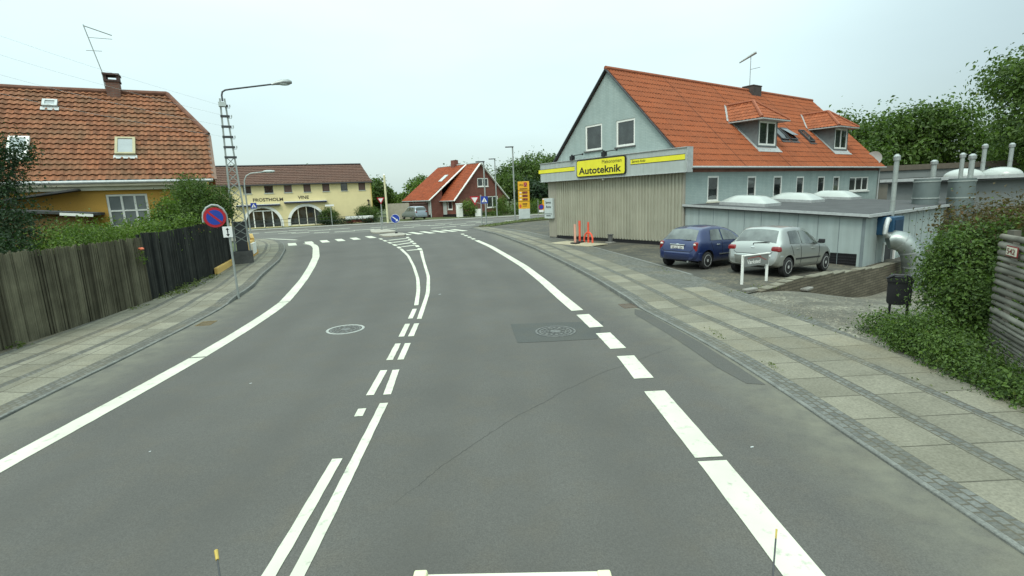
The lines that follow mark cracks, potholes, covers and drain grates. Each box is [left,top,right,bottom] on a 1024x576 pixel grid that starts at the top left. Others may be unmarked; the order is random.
manhole cover [535,326,576,337]
manhole cover [326,324,365,334]
crack [402,351,661,497]
